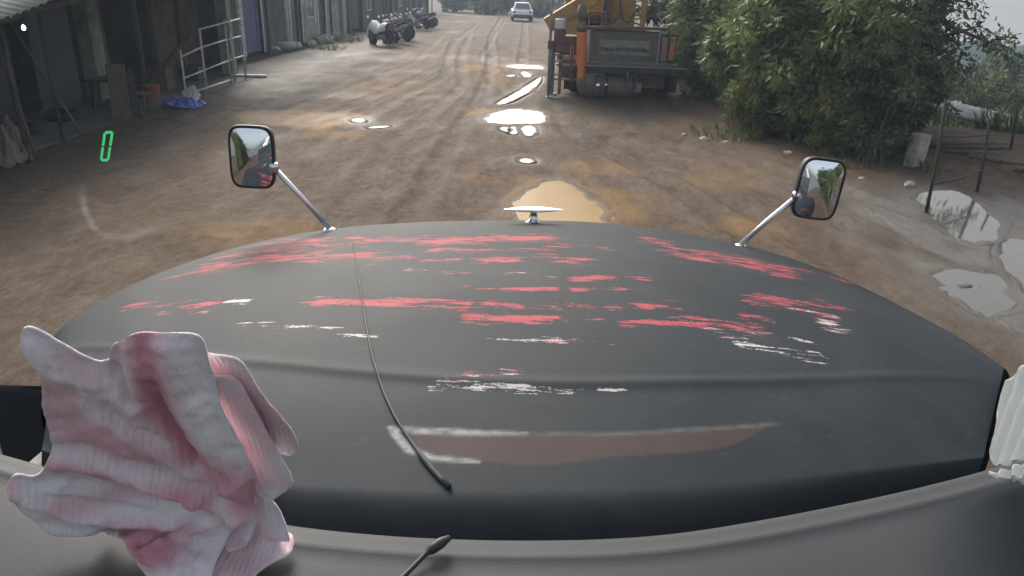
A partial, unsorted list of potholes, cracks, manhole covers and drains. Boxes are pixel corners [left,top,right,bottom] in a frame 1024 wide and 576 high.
pothole [905,187,1013,246]
pothole [516,123,539,137]
pothole [916,264,1024,321]
pothole [501,178,616,223]
pothole [988,235,1024,291]
pothole [479,107,553,126]
